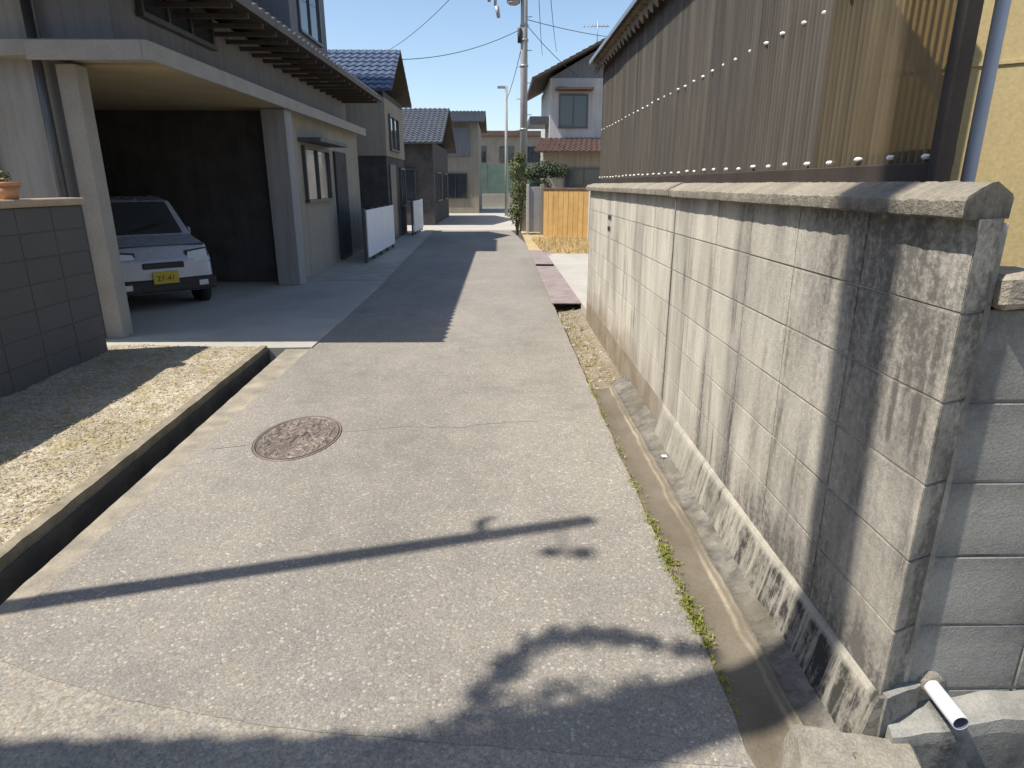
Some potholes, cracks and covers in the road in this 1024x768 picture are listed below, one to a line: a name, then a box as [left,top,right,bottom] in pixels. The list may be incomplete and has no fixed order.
crack [207,421,530,450]
manhole cover [252,416,342,461]
